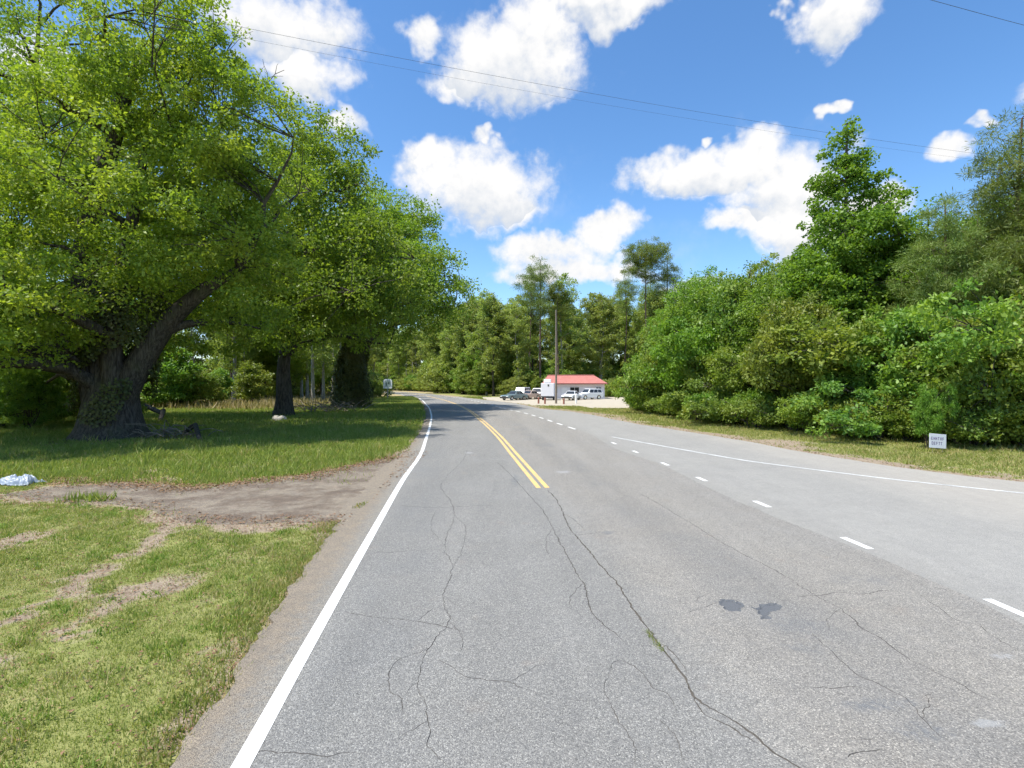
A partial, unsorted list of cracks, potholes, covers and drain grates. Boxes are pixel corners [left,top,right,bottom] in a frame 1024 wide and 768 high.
crack [351,457,562,767]
crack [498,463,953,768]
